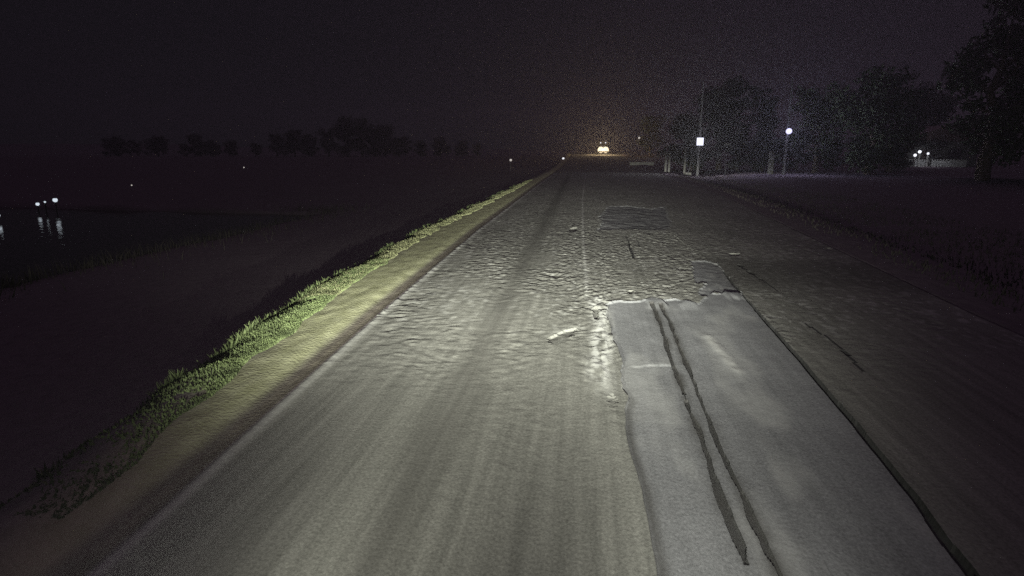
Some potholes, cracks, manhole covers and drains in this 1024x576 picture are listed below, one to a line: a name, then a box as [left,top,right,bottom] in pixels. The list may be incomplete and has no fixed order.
crack [649,264,980,576]
